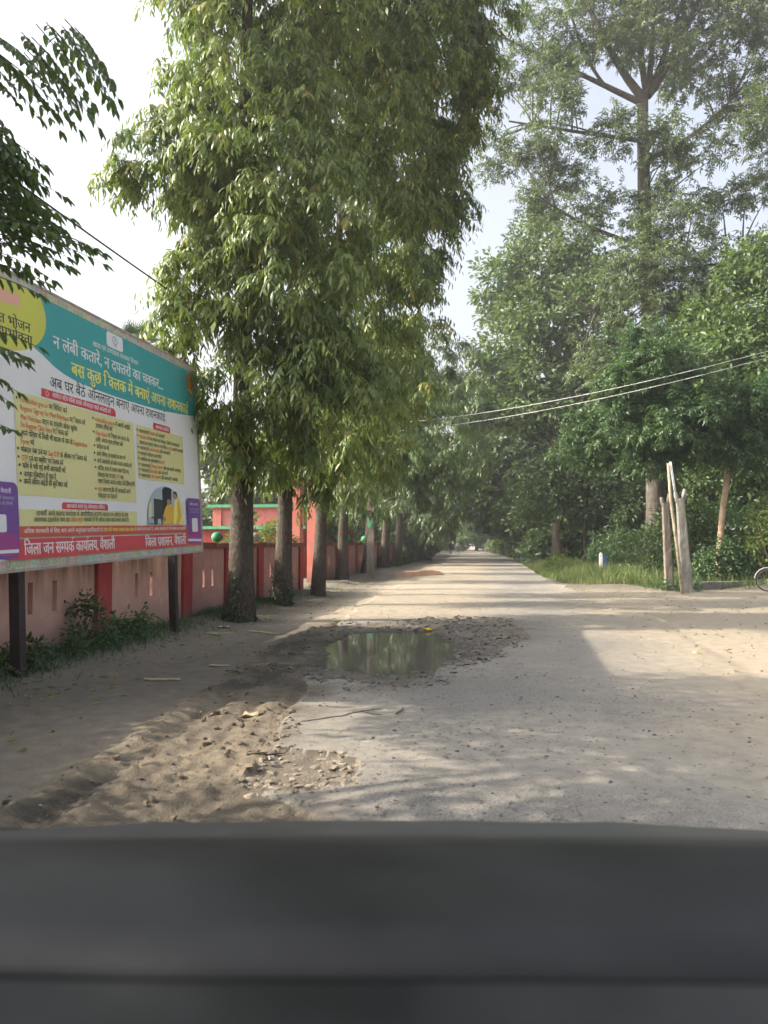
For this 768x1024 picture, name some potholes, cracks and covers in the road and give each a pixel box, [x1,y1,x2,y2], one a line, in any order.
pothole [269,615,531,691]
pothole [238,745,365,799]
